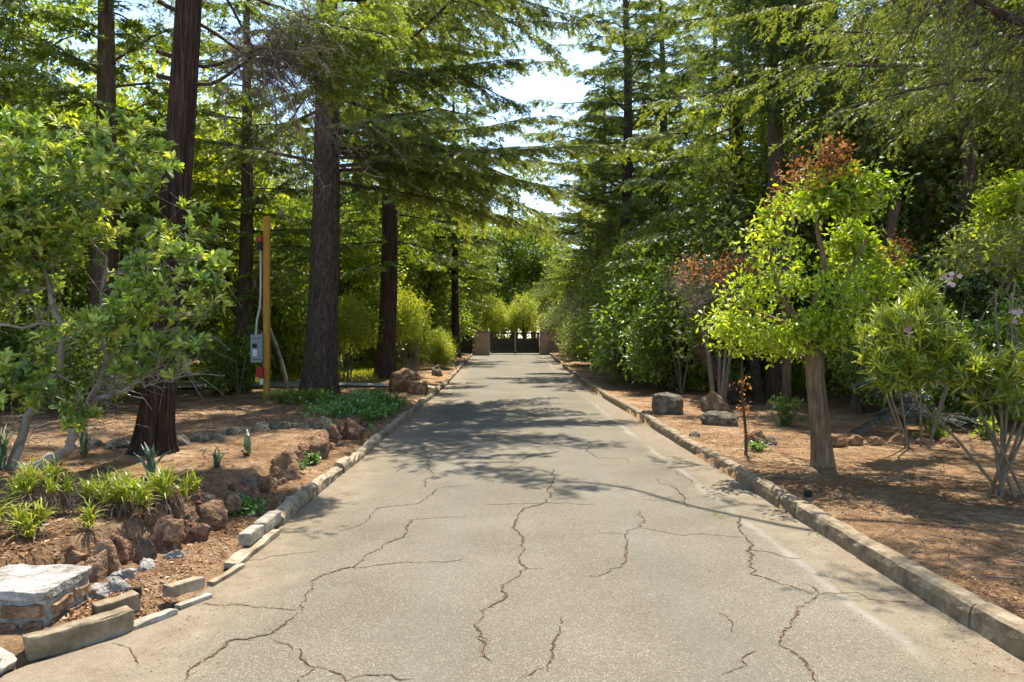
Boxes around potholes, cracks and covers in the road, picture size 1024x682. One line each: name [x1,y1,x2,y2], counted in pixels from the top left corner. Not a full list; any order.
crack [592,473,914,681]
crack [185,453,466,682]
crack [516,616,563,680]
crack [473,469,595,661]
